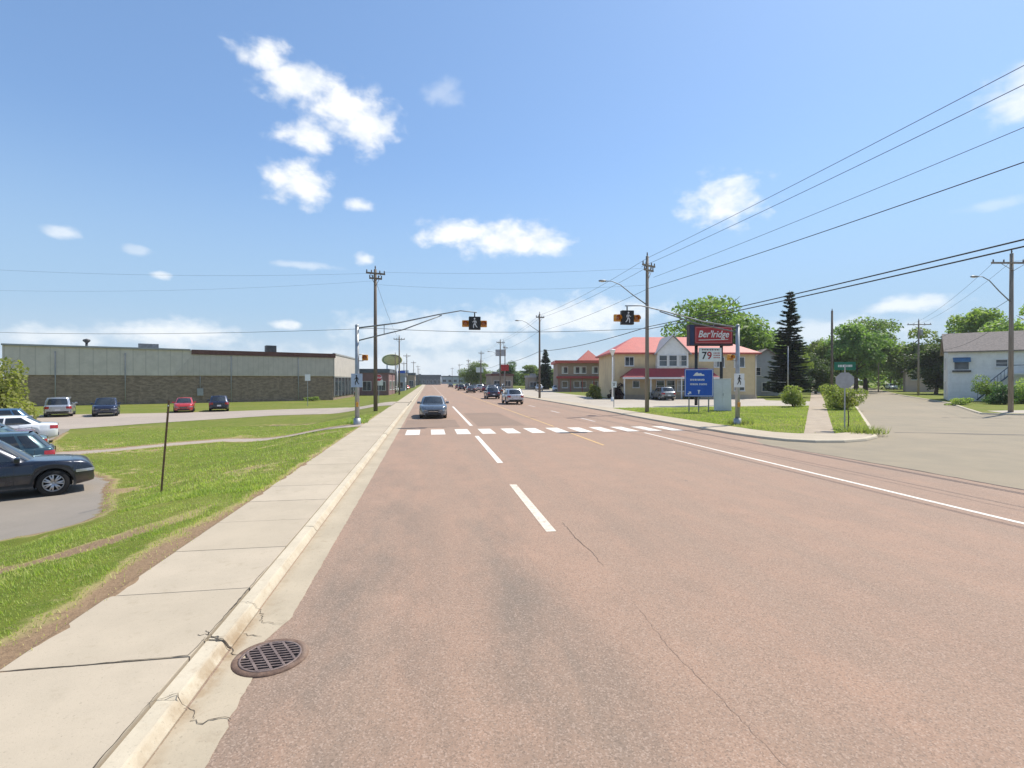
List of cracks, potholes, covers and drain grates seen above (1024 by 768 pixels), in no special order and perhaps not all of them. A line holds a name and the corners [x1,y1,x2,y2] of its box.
crack [637,607,787,767]
crack [93,693,231,768]
drain grate [230,638,309,678]
